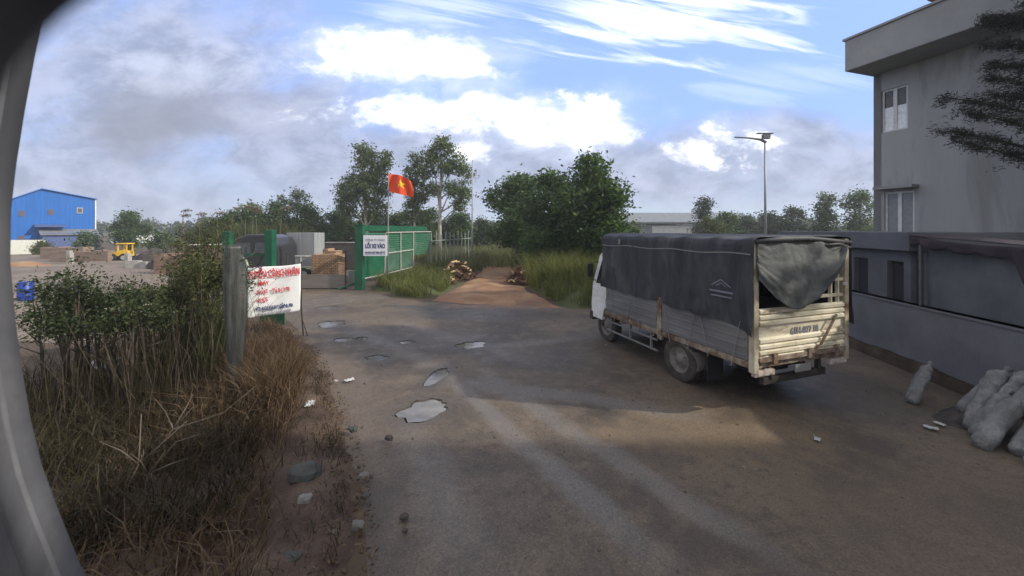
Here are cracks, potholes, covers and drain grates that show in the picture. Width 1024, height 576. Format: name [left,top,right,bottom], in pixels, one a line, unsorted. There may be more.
pothole [422,368,449,386]
pothole [392,398,448,423]
pothole [317,320,346,328]
pothole [454,341,486,349]
